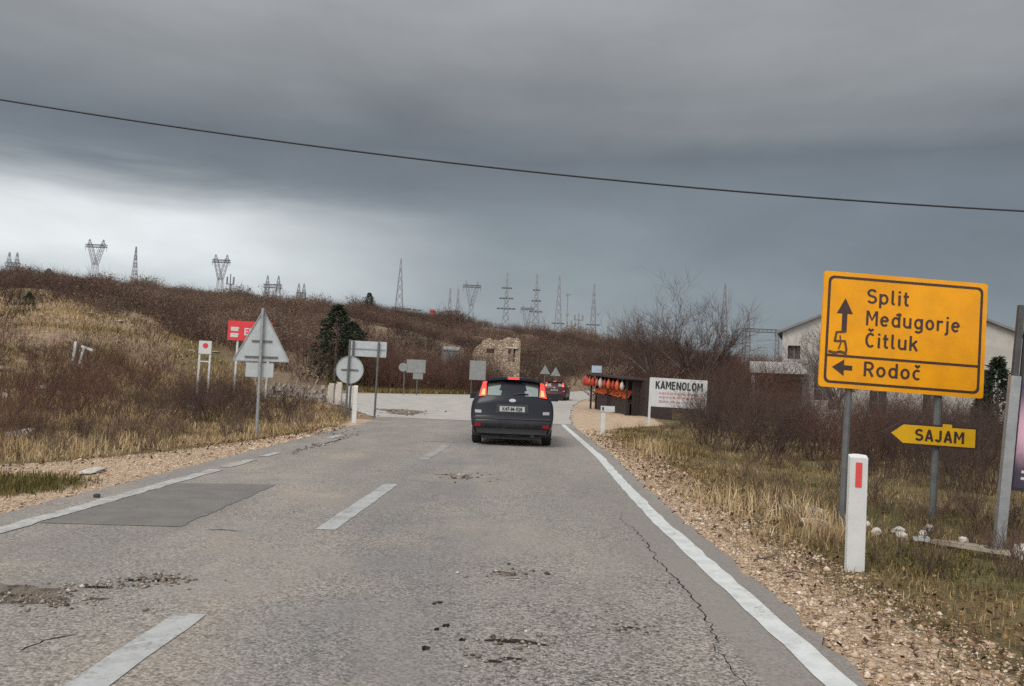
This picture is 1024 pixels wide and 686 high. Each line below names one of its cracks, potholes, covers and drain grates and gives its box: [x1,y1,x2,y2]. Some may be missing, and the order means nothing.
crack [622,514,747,686]
pothole [0,583,74,604]
crack [20,634,76,651]
